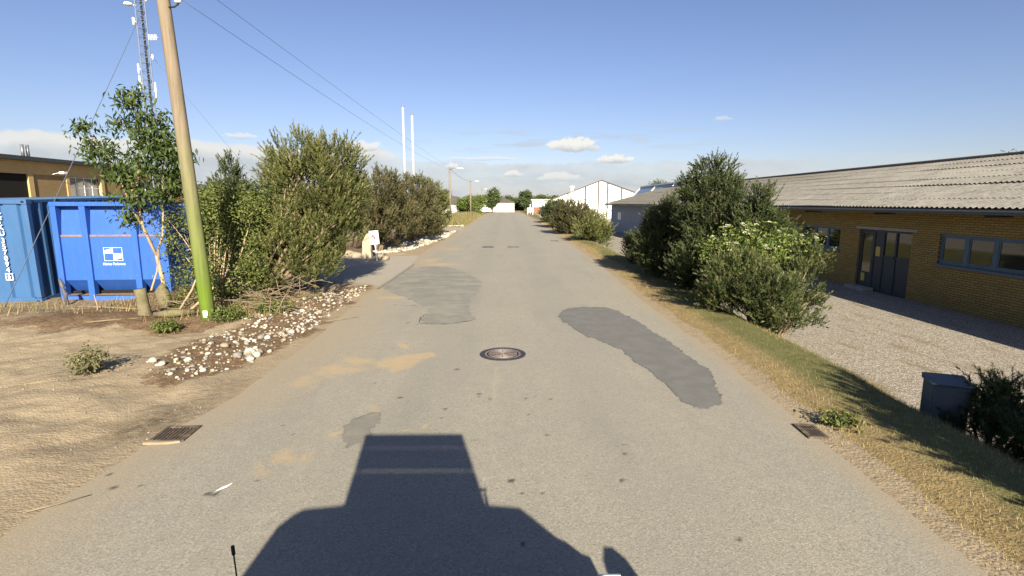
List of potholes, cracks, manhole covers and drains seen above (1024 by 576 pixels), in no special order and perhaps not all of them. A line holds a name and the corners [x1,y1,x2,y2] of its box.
drain grate [793,423,829,440]
drain grate [148,425,202,442]
manhole cover [480,347,526,361]
